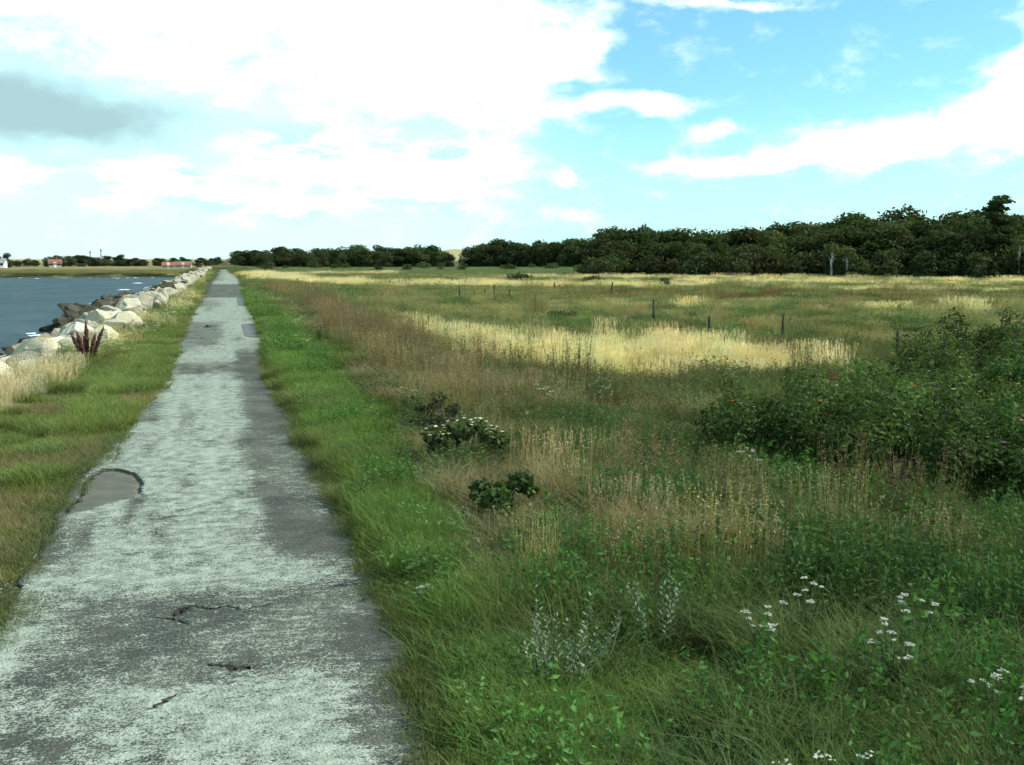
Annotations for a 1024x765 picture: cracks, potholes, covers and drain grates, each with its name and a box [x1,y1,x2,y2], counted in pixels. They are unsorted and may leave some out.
pothole [62,468,144,515]
crack [157,603,269,624]
crack [145,694,176,710]
